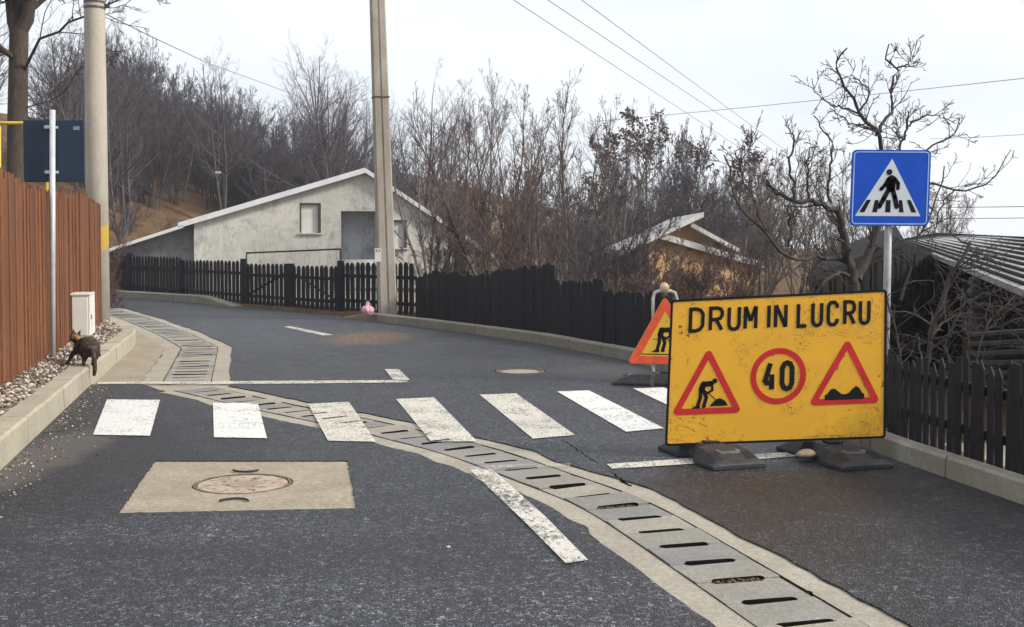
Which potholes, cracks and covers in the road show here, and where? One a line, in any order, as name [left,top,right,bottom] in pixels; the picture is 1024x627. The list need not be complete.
manhole cover [120,462,356,513]
crack [563,440,632,486]
